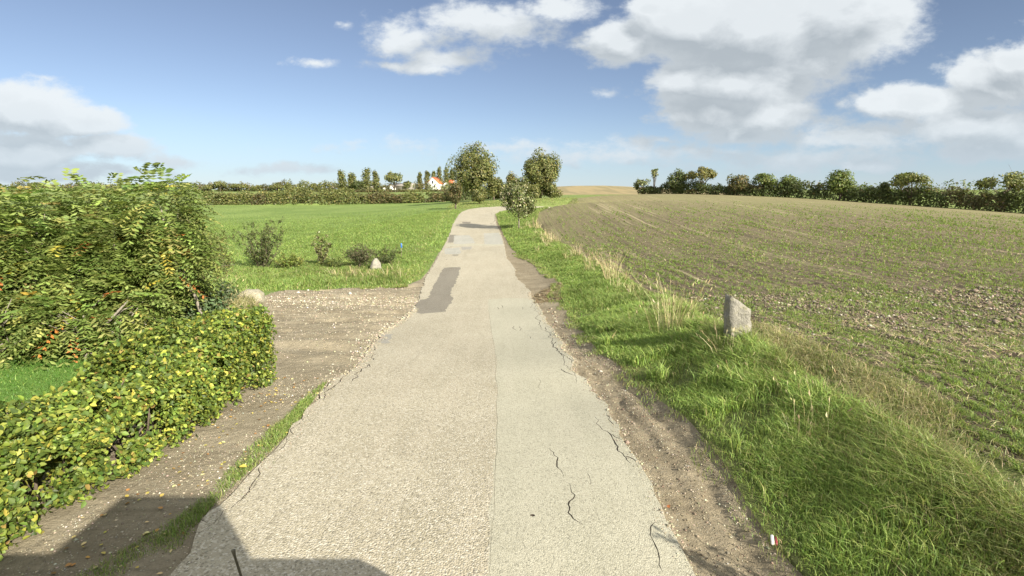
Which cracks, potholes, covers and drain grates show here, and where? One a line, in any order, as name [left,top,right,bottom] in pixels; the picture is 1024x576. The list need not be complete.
crack [650,521,663,572]
crack [552,451,591,524]
crack [513,304,577,381]
crack [595,394,636,463]
